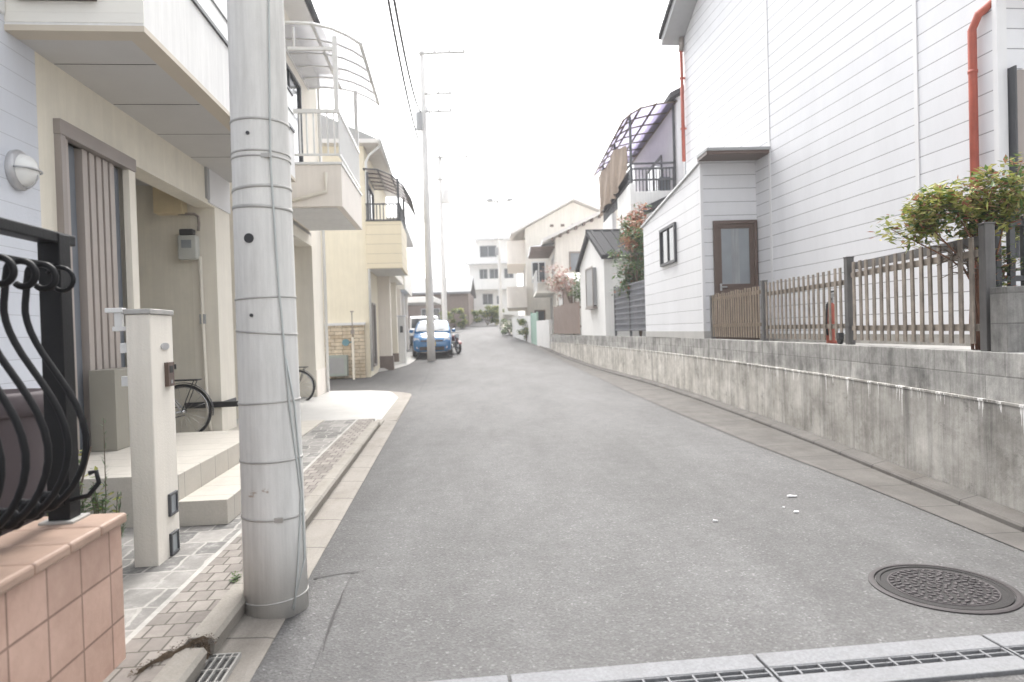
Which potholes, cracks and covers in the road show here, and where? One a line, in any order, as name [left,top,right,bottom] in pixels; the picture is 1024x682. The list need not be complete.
drain grate [195,652,241,682]
manhole cover [868,564,1024,615]
crack [314,570,366,652]
